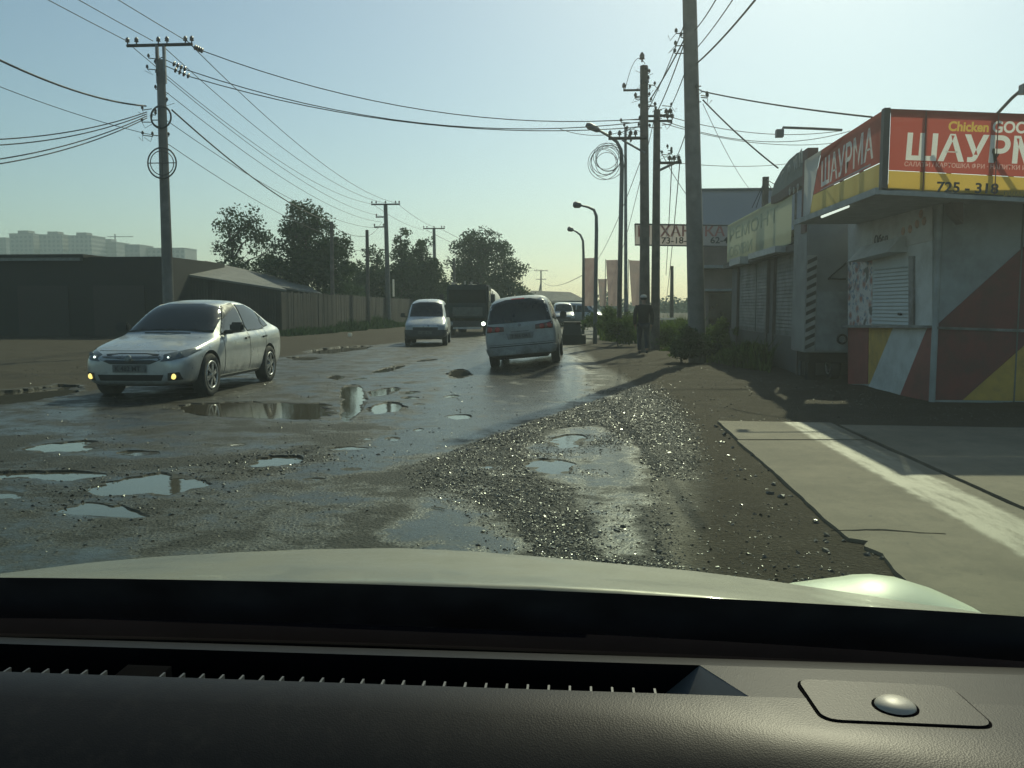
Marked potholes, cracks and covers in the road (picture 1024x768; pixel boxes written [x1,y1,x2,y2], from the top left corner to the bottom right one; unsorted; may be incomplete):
pothole [22,440,106,453]
pothole [56,502,150,518]
pothole [247,454,304,467]
pothole [85,471,212,496]
pothole [173,401,338,420]
pothole [0,470,108,481]
pothole [548,434,588,449]
pothole [445,369,473,379]
pothole [365,402,409,414]
pothole [522,458,576,474]
pothole [339,384,369,422]
